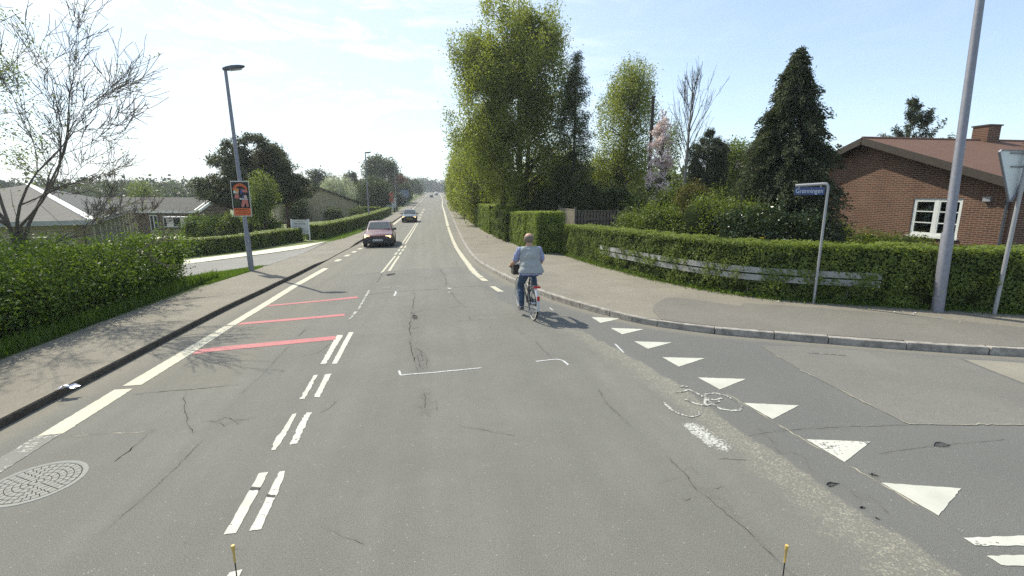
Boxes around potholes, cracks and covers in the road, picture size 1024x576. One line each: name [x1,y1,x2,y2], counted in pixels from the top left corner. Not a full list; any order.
crack [669,458,787,570]
crack [409,293,433,371]
manhole cover [0,460,89,508]
crack [113,386,222,525]
